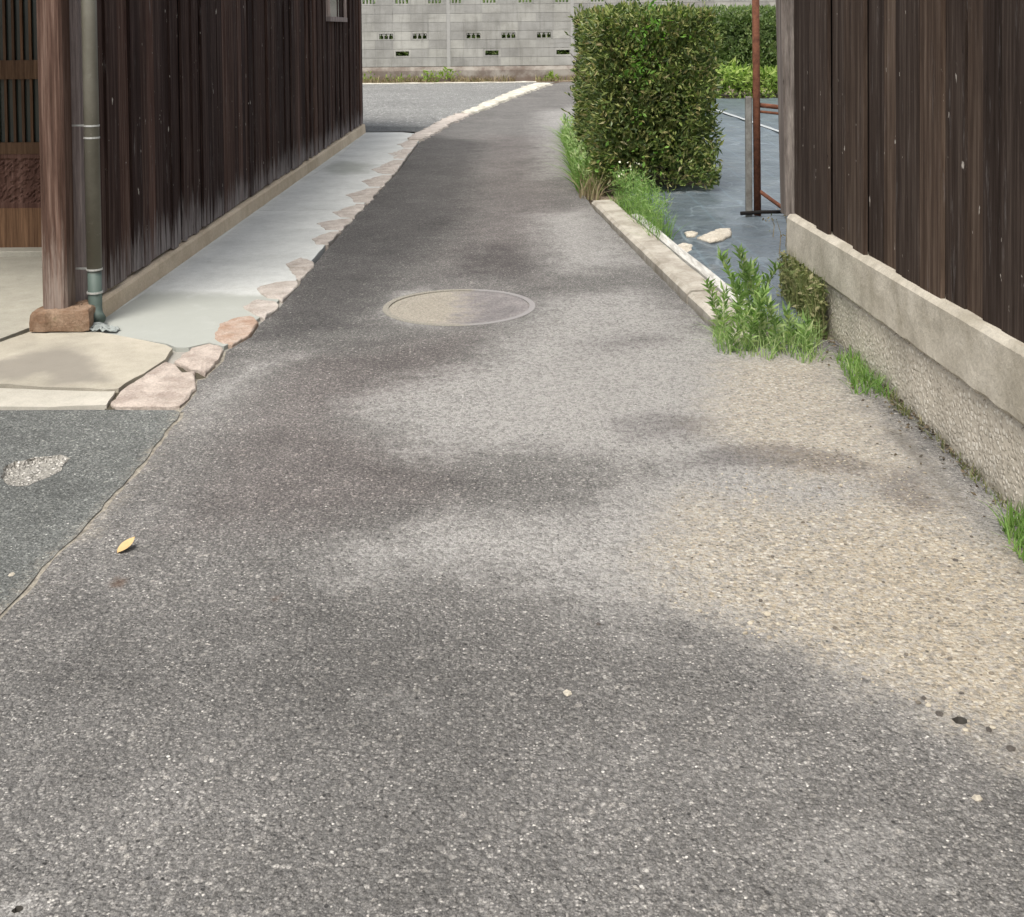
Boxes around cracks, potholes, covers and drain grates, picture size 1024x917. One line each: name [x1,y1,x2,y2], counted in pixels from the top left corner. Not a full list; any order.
manhole cover [383,289,535,326]
